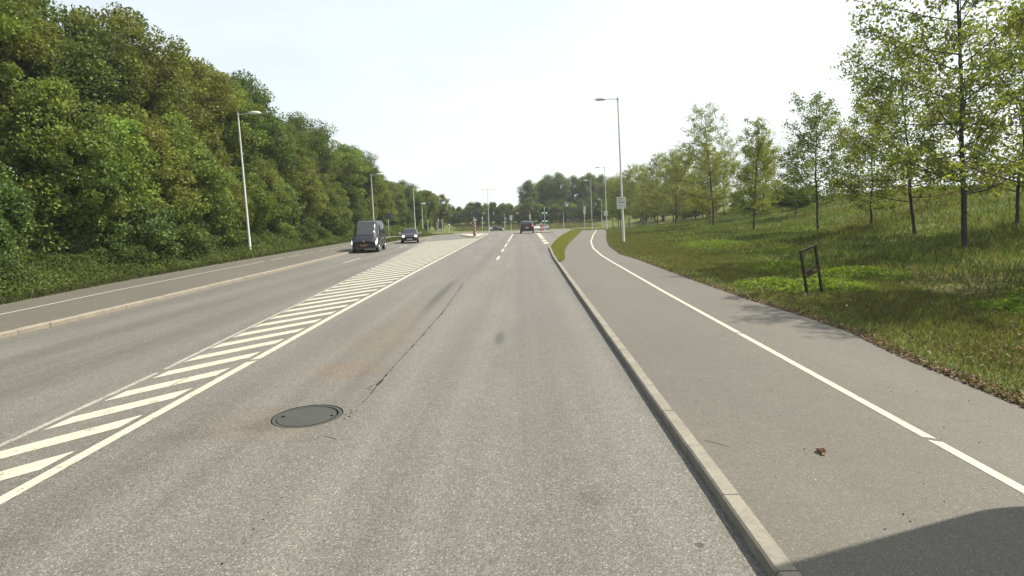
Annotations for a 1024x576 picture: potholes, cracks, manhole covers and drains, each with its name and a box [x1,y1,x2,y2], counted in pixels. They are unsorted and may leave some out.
manhole cover [271,405,343,428]
crack [220,283,464,565]
